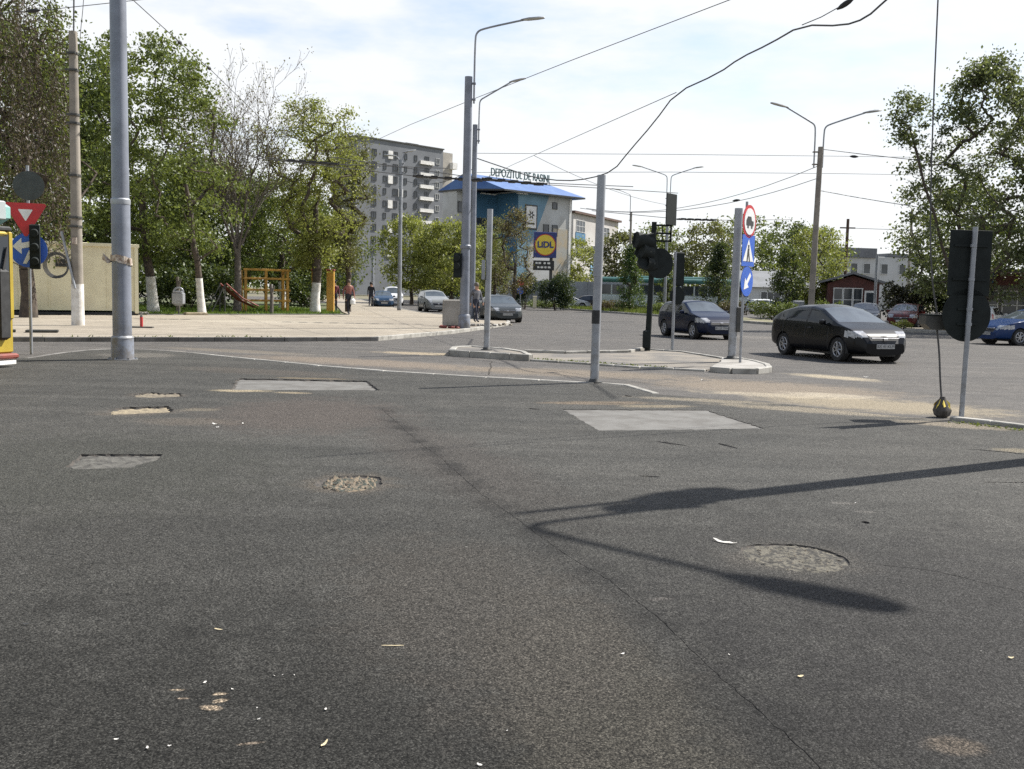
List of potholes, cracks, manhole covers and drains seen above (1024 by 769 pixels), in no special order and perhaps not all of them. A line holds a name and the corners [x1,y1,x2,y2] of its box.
crack [383,410,821,769]
pothole [108,406,174,415]
pothole [314,475,383,492]
